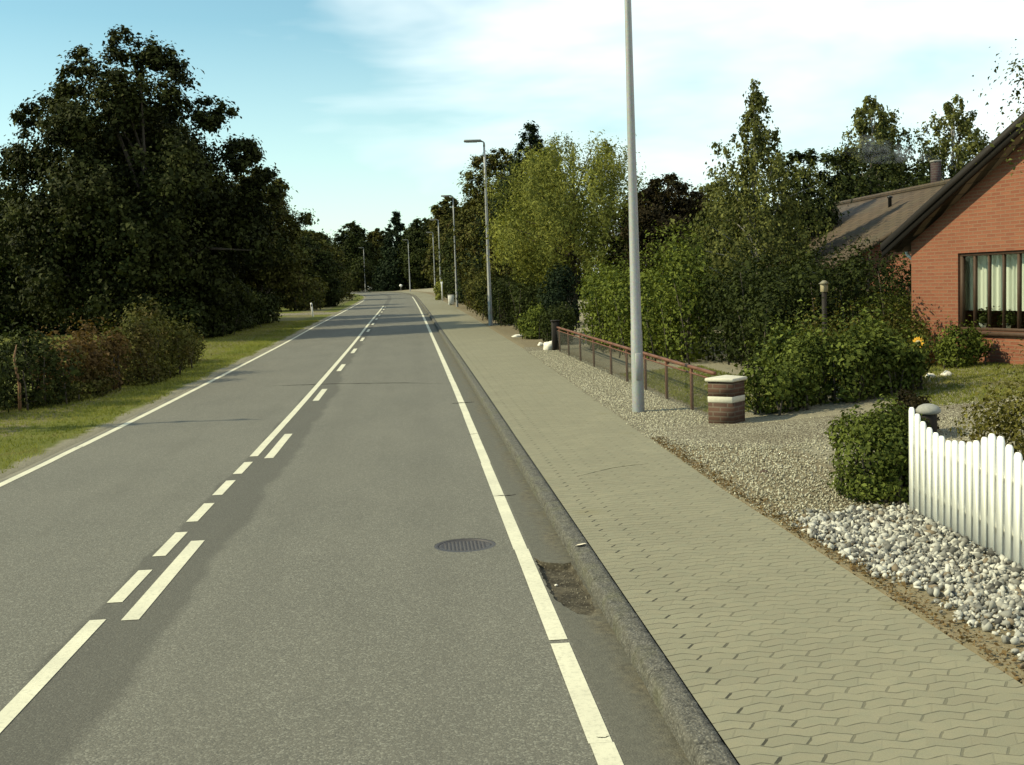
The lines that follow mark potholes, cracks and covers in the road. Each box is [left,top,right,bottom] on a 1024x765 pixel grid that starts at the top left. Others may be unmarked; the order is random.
manhole cover [434,538,496,552]
pothole [534,558,597,616]
